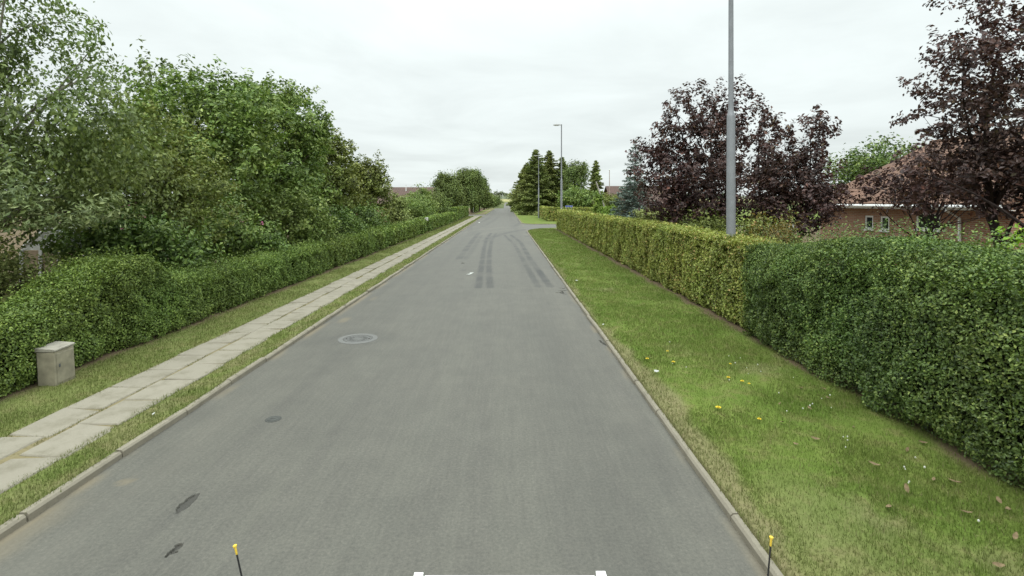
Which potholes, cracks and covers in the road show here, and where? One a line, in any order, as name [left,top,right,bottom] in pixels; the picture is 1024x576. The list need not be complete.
manhole cover [338,334,378,344]
pothole [173,492,201,515]
